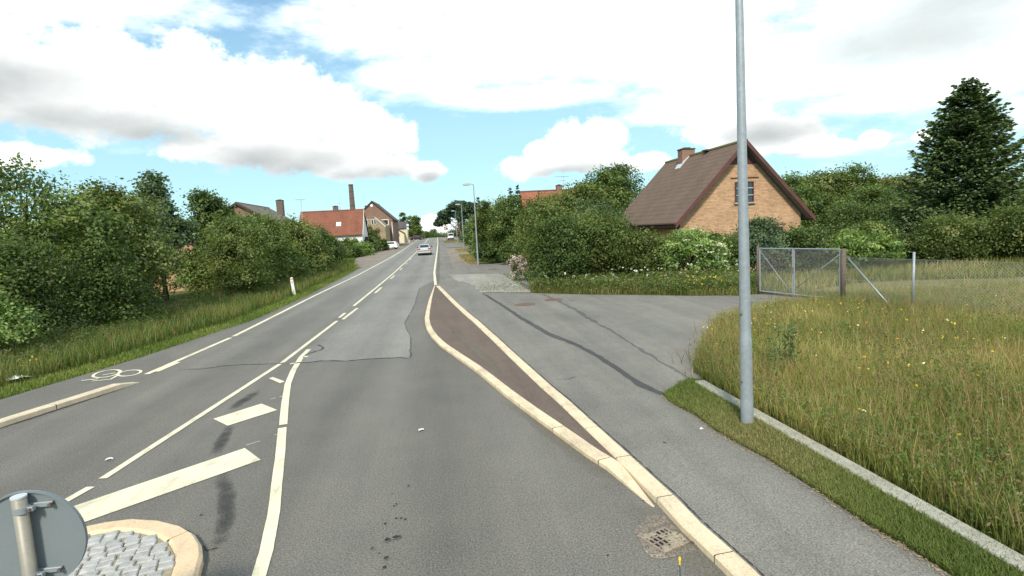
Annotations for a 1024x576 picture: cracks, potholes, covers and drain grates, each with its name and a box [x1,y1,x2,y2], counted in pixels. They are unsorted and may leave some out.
drain grate [640,526,689,554]
